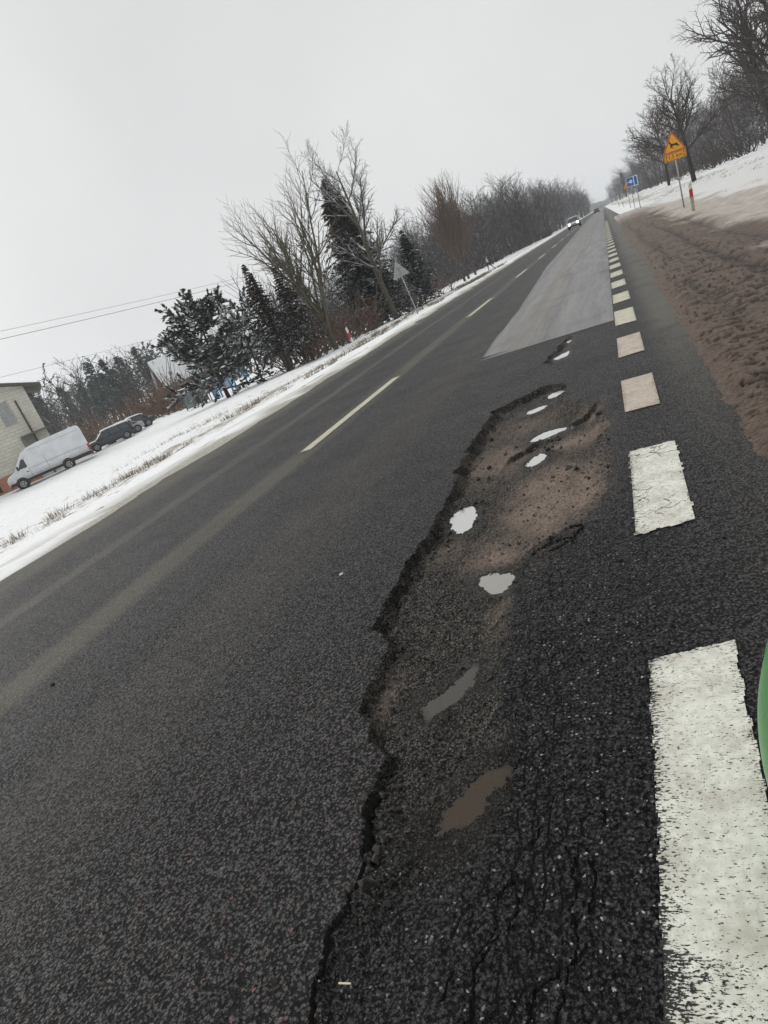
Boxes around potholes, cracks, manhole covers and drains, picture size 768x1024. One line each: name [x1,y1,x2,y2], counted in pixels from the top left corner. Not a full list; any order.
pothole [315,383,613,1024]
crack [440,567,611,1024]
pothole [542,336,576,366]
